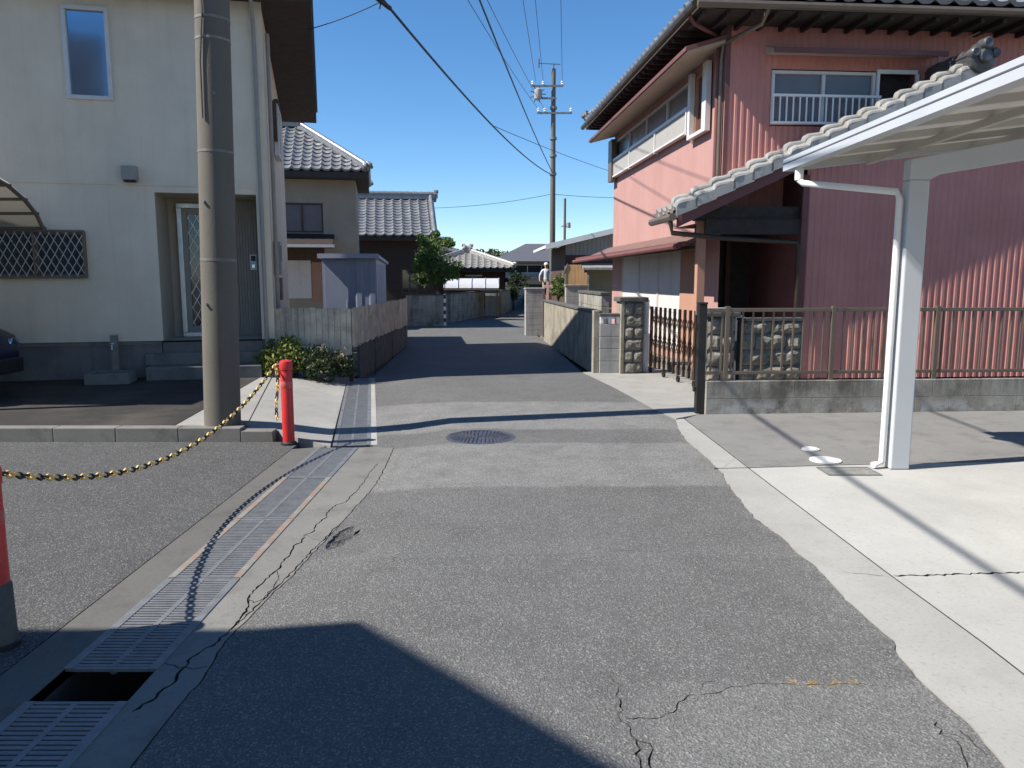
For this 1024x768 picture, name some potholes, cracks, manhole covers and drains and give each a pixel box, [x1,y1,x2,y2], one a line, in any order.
drain grate [284,447,358,477]
pothole [325,525,361,550]
crack [132,464,377,712]
drain grate [169,519,294,578]
drain grate [346,378,371,387]
manhole cover [446,430,515,444]
drain grate [236,477,331,519]
drain grate [64,578,240,674]
crack [600,672,888,768]
drain grate [333,425,371,448]
drain grate [344,387,371,398]
drain grate [337,410,371,426]
